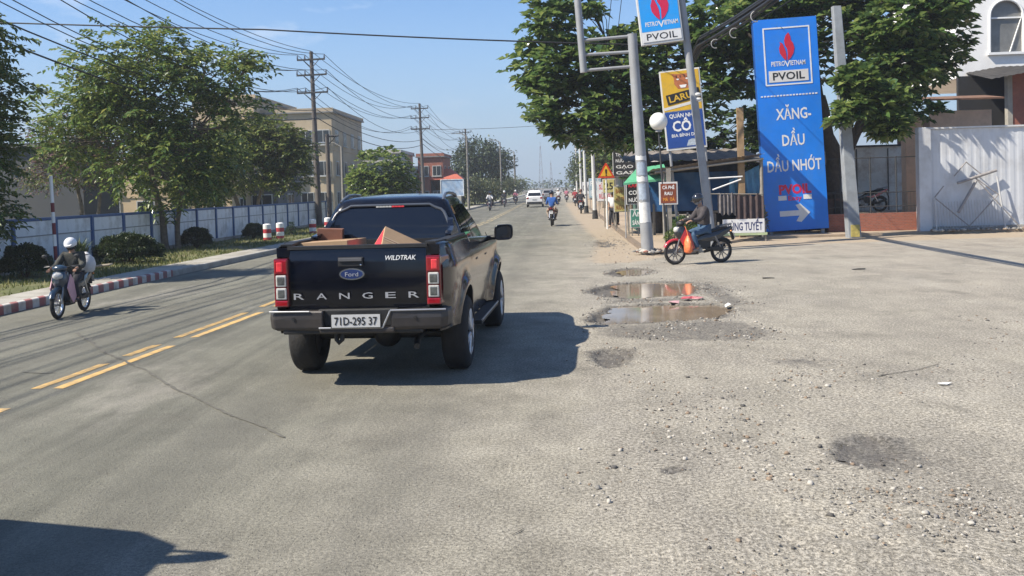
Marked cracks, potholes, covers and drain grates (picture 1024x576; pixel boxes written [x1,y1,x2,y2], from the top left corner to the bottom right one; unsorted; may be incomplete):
pothole [602,267,658,277]
crack [75,332,285,438]
pothole [578,280,713,299]
pothole [576,301,745,326]
pothole [582,346,641,370]
